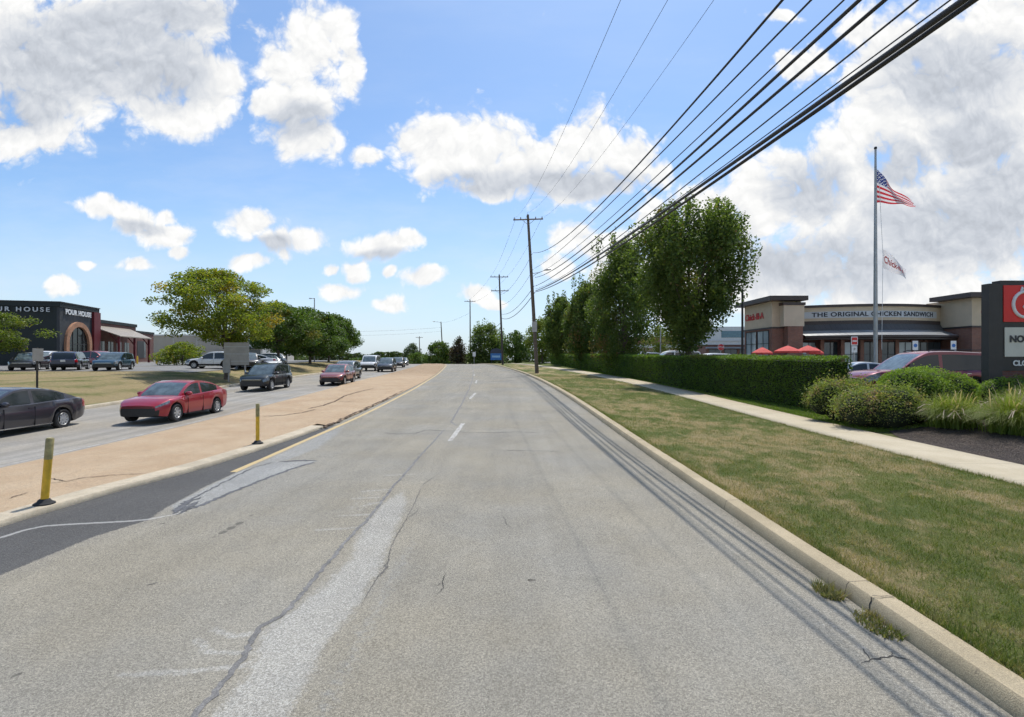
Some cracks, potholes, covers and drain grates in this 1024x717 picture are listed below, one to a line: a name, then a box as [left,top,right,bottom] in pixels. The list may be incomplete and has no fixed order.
crack [361,478,432,605]
crack [862,649,918,663]
crack [275,388,402,428]
